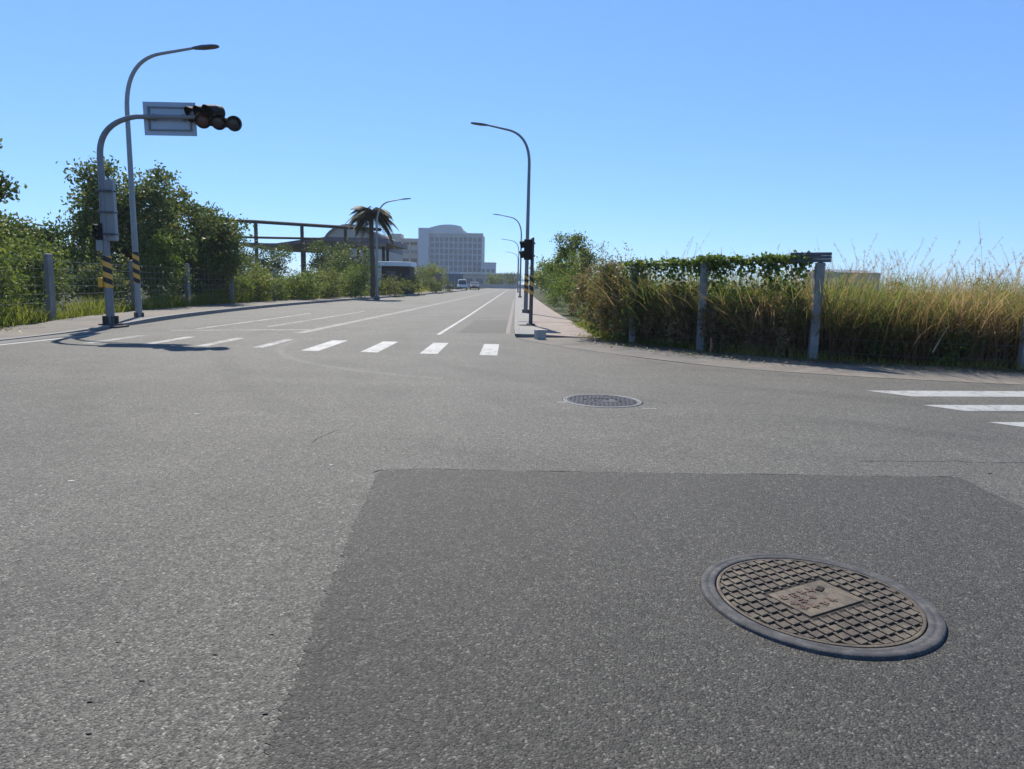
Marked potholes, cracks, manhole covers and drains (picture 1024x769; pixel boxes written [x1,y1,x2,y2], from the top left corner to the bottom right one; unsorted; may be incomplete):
manhole cover [700,553,947,661]
manhole cover [563,394,643,408]
